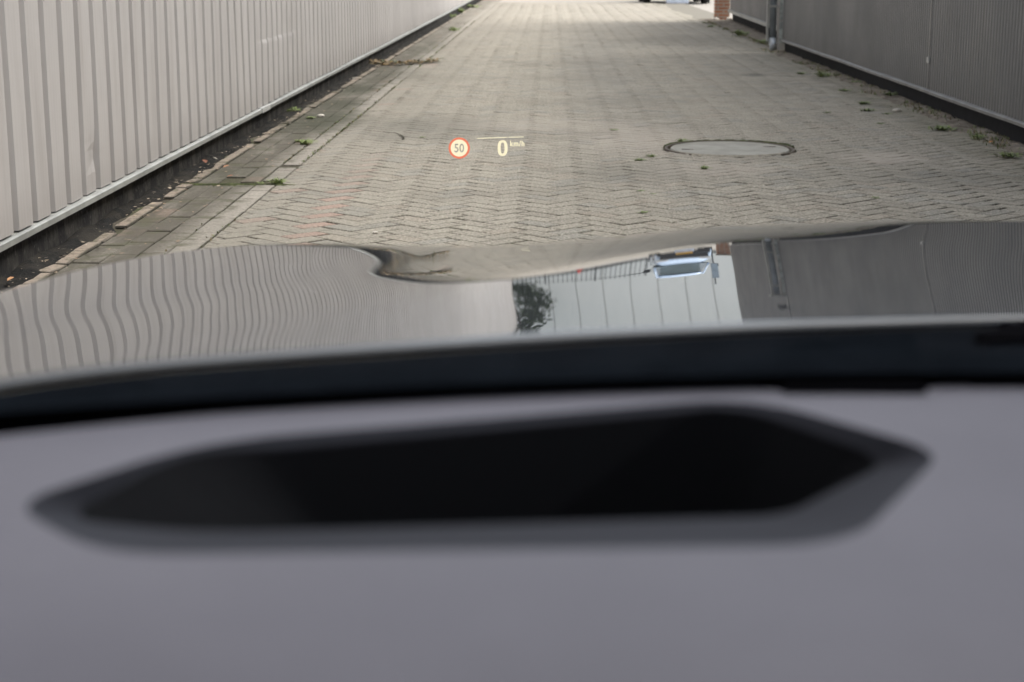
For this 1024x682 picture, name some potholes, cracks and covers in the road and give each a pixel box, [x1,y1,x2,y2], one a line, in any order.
manhole cover [664,140,796,158]
